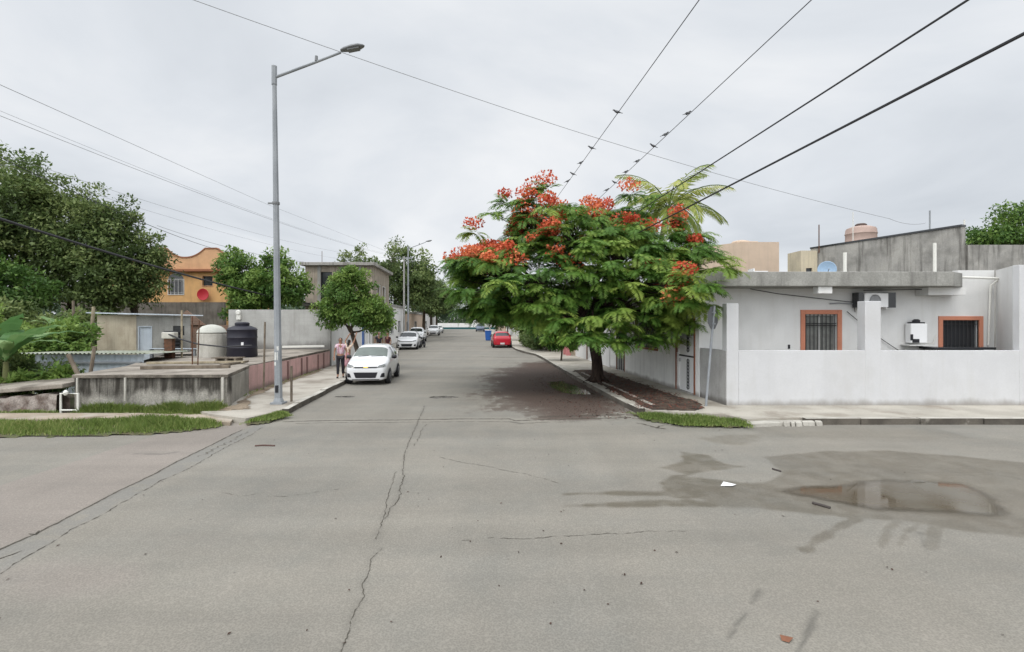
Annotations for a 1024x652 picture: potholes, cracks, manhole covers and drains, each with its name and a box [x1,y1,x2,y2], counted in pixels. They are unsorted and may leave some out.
crack [341,413,427,652]
